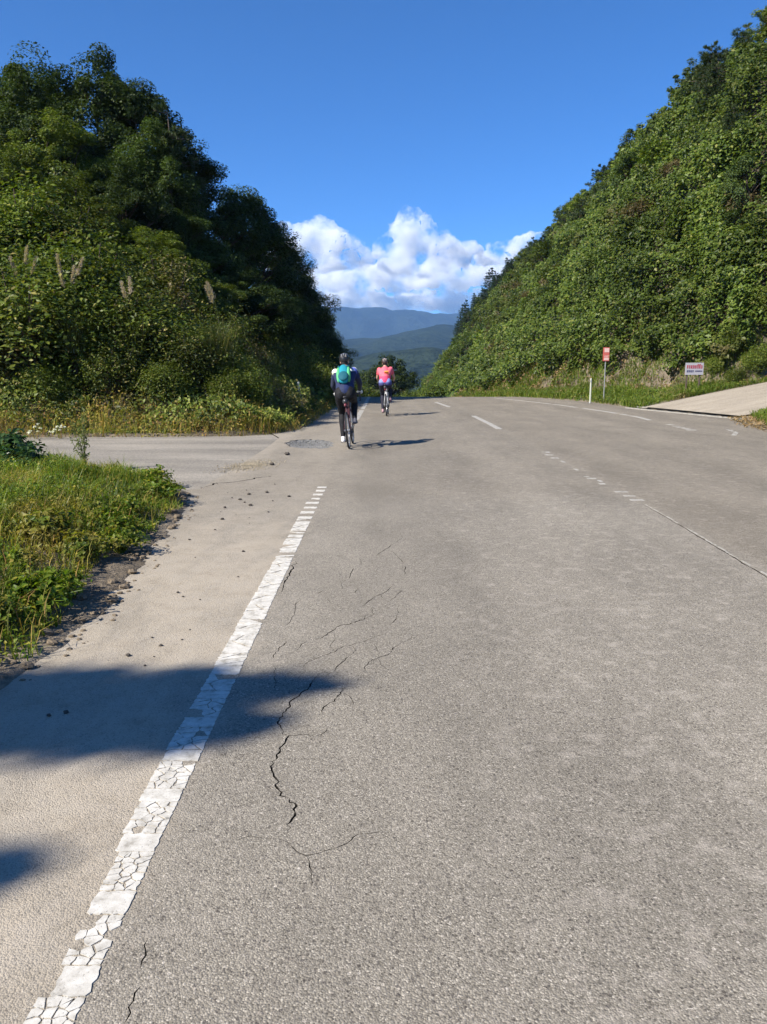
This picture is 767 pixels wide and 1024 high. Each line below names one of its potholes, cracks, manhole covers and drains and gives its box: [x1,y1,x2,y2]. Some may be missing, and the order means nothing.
crack [241,533,412,887]
